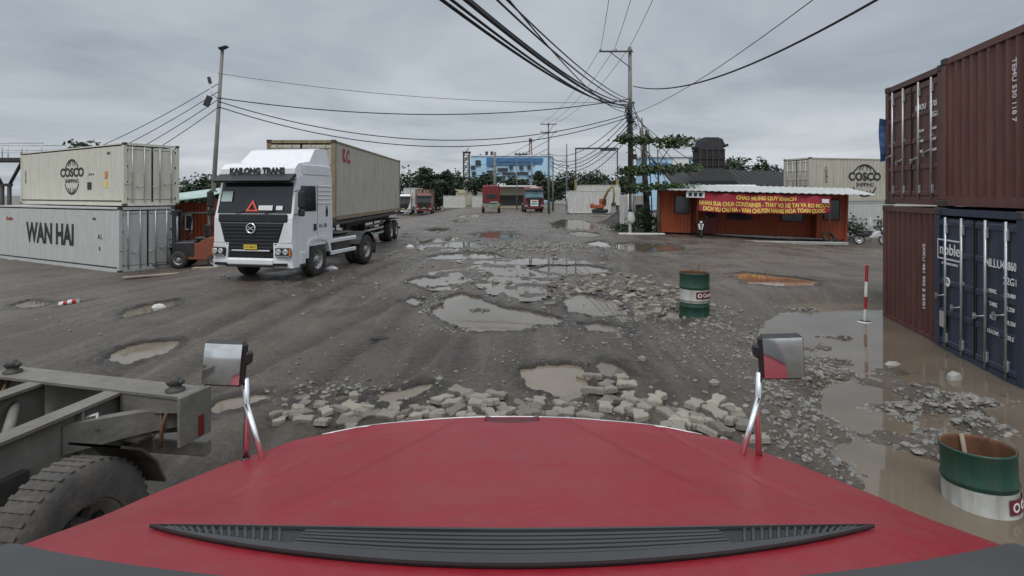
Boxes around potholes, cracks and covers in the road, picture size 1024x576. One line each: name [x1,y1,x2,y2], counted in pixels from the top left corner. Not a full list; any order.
pothole [547,219,602,230]
pothole [521,263,622,277]
pothole [549,291,641,319]
pothole [78,332,205,374]
pothole [211,383,296,426]
pothole [609,241,689,254]
pothole [495,353,616,410]
pothole [417,290,583,337]
pothole [465,231,527,240]
pothole [426,264,590,301]
pothole [397,275,457,292]
pothole [100,296,195,321]
